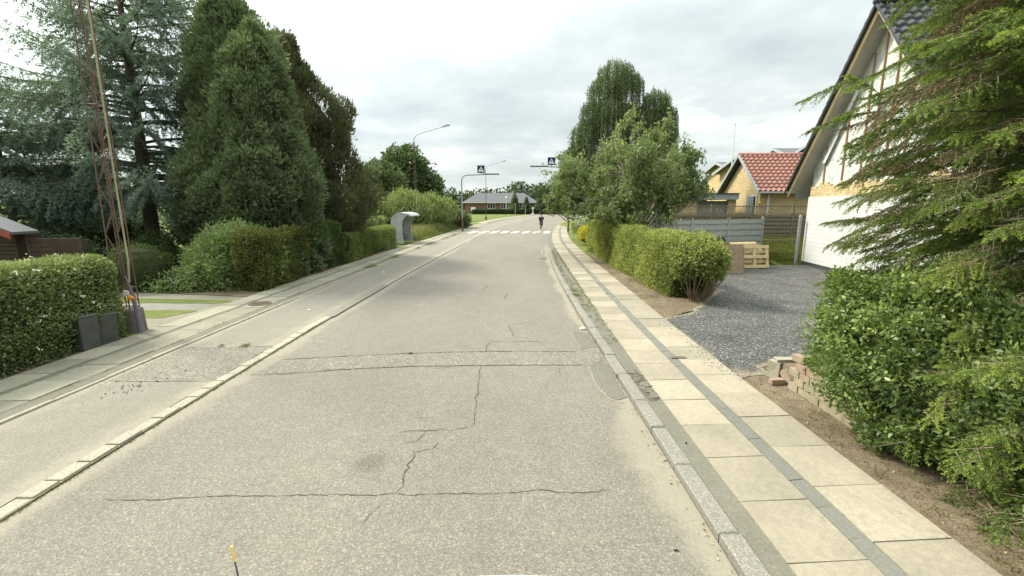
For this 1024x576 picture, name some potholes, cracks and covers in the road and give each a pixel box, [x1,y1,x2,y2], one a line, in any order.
crack [102,366,608,525]
